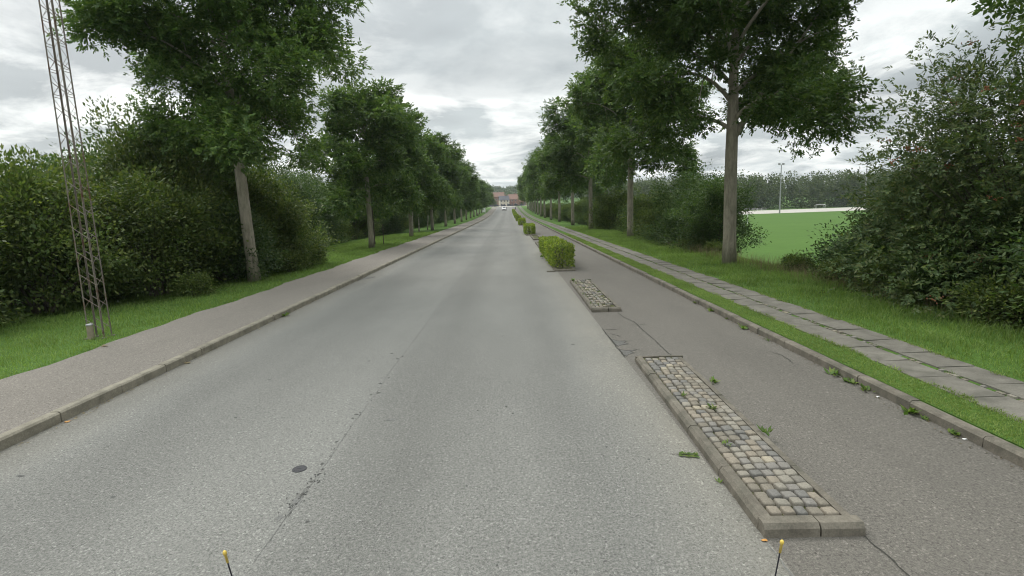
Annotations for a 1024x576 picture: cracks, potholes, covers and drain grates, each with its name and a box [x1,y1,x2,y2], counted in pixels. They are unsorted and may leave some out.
crack [865,536,910,576]
